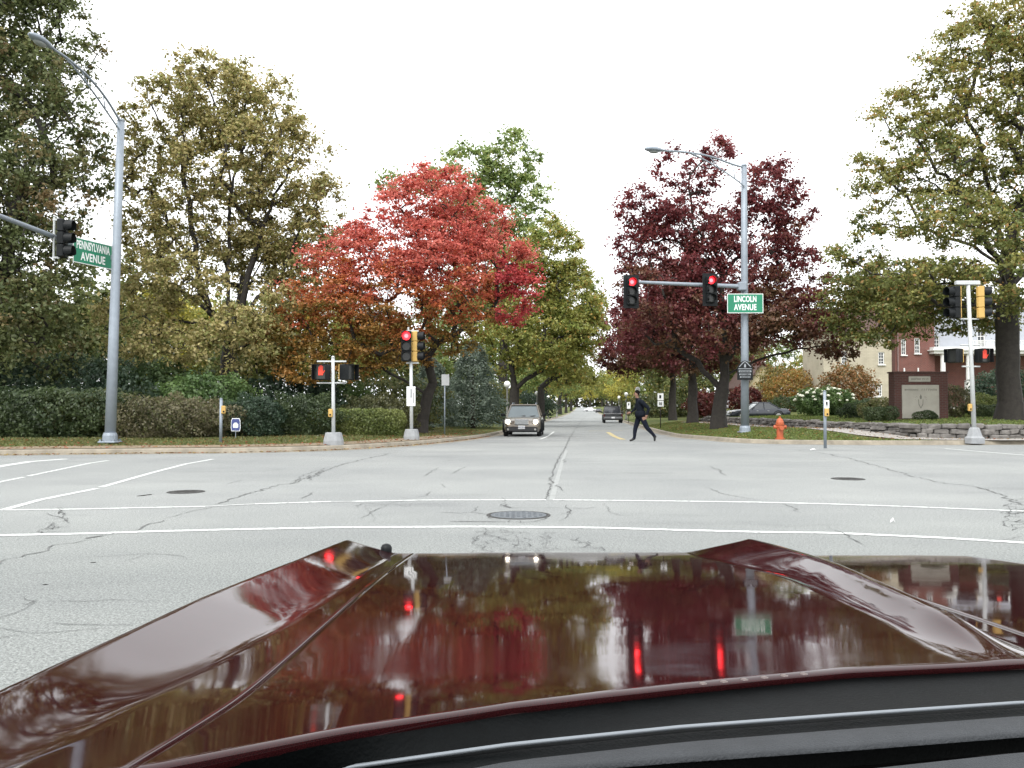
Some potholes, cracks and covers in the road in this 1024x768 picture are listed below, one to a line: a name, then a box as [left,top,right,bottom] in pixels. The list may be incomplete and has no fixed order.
crack [0,507,186,575]
crack [1001,498,1024,540]
manhole cover [487,511,550,520]
crack [0,596,95,638]
crack [453,416,605,552]
crack [171,454,386,517]
